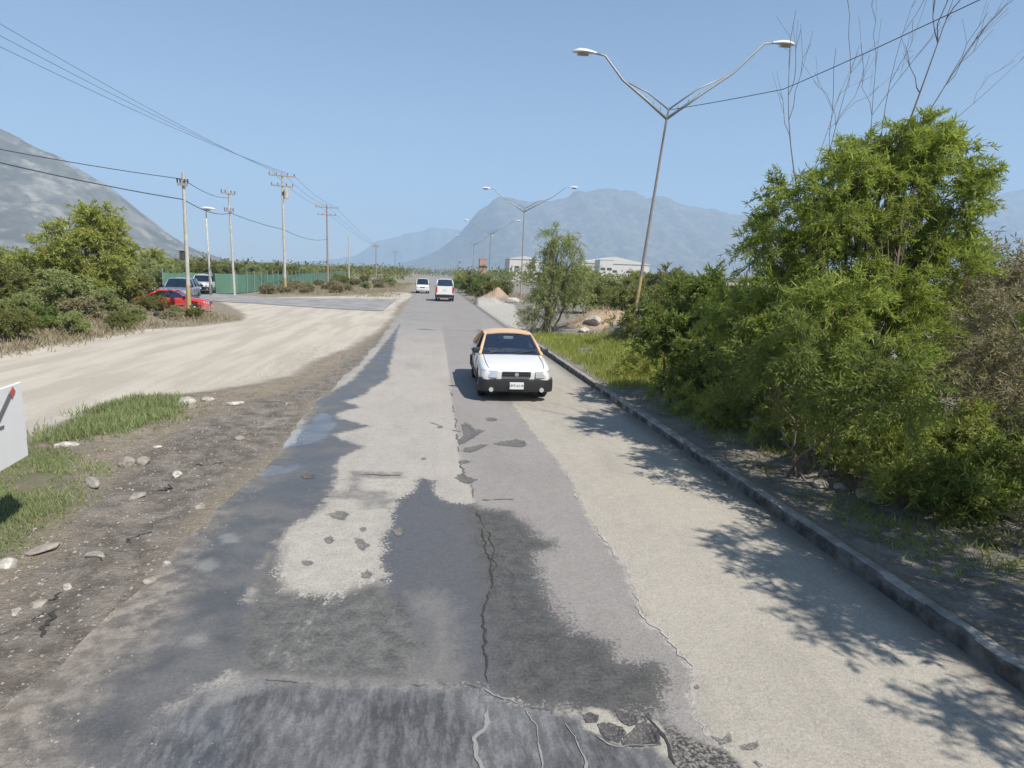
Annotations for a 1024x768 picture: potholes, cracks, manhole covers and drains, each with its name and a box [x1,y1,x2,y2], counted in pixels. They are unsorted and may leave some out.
pothole [328,511,349,520]
pothole [597,722,626,743]
pothole [459,422,485,443]
pothole [615,710,638,726]
pothole [583,712,599,723]
pothole [495,439,526,447]
pothole [621,720,661,747]
crack [472,499,544,768]
